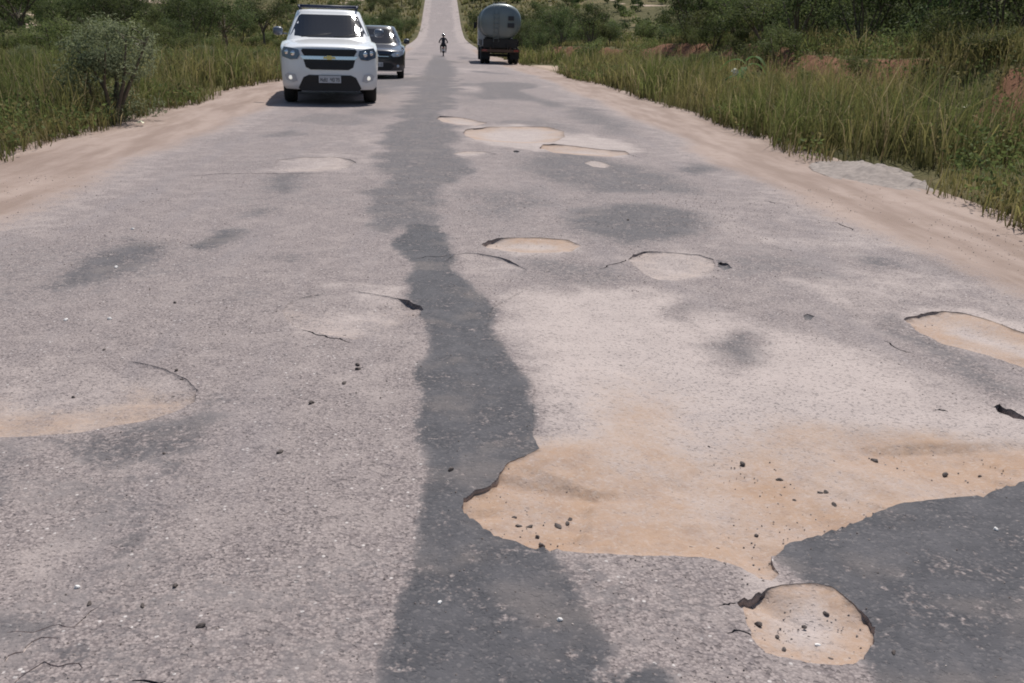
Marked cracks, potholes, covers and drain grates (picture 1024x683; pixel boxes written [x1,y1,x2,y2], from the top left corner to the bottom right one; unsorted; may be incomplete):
pothole [628,251,715,281]
pothole [539,144,629,157]
pothole [737,583,875,665]
pothole [273,157,356,172]
pothole [463,127,565,143]
pothole [481,237,581,253]
pothole [0,353,198,437]
pothole [437,116,486,126]
pothole [461,283,1024,581]
crack [5,607,98,683]
